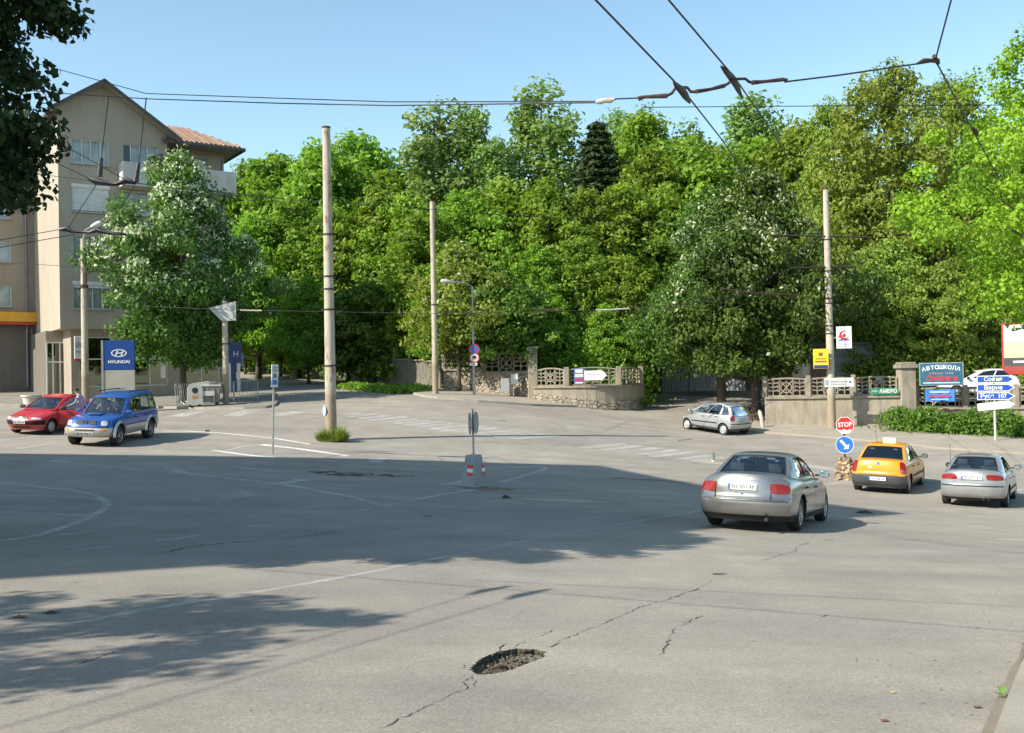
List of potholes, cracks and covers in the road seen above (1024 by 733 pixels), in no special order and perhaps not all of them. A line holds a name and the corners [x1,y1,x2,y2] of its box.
crack [381,665,477,728]
crack [498,540,824,652]
pothole [469,648,546,675]
